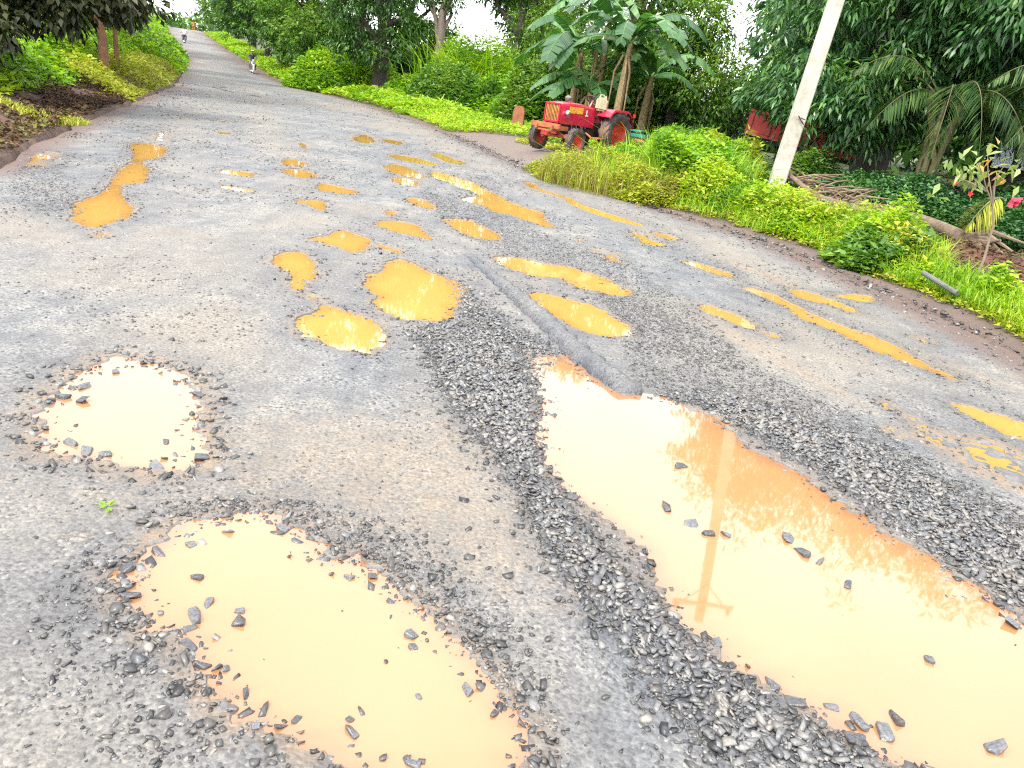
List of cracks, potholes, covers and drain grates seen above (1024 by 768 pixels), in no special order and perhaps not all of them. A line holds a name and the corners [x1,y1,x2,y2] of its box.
pothole [698,303,758,330]
pothole [270,250,319,289]
pothole [106,507,533,768]
pothole [30,354,212,472]
pothole [361,257,468,321]
pothole [429,171,555,228]
pothole [530,354,1024,768]
pothole [308,229,372,252]
pothole [68,142,168,227]
pothole [741,285,960,380]
pothole [493,255,634,296]
pothole [383,163,425,178]
